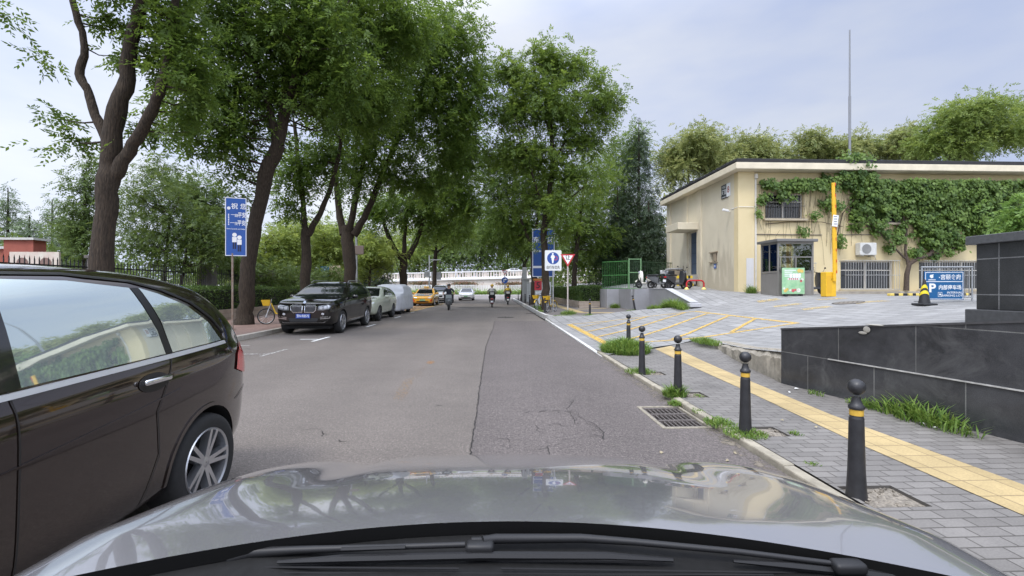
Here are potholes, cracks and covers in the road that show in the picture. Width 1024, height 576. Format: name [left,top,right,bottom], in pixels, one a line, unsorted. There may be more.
crack [525,401,605,454]
drain grate [637,406,712,429]
